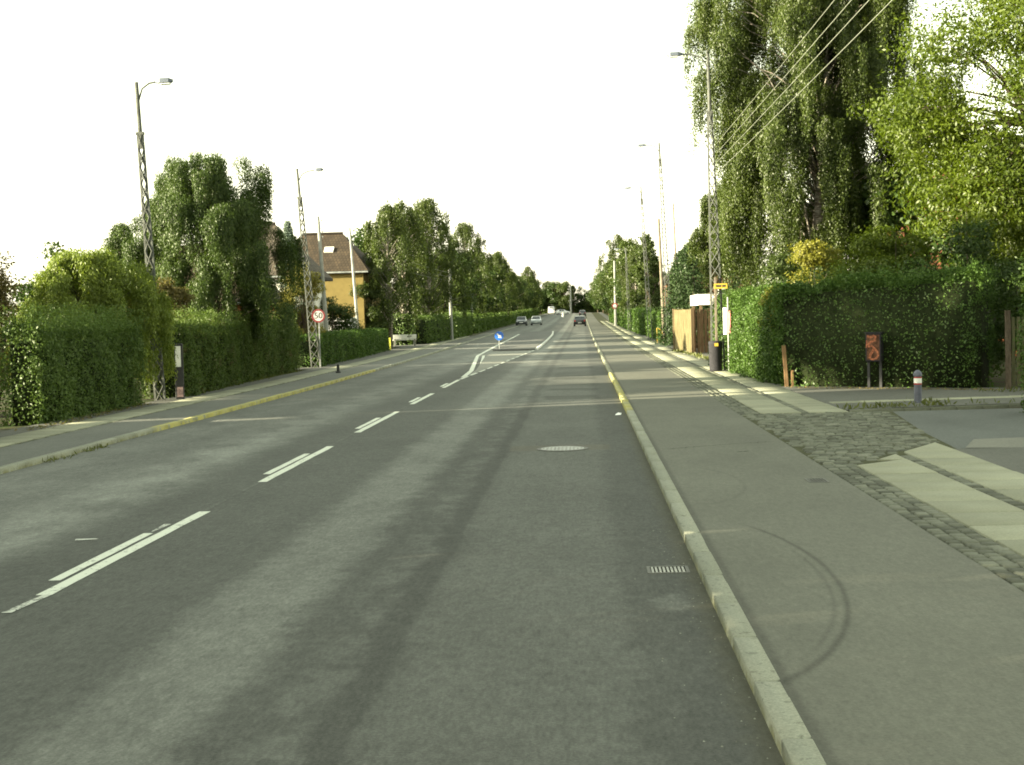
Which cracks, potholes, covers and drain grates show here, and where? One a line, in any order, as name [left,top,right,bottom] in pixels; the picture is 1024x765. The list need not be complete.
drain grate [646,565,690,574]
